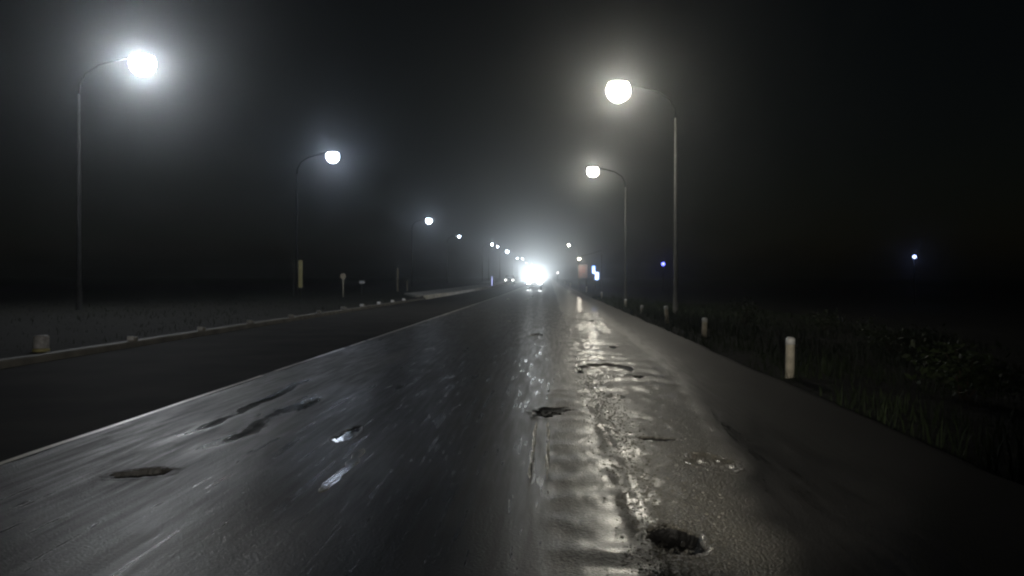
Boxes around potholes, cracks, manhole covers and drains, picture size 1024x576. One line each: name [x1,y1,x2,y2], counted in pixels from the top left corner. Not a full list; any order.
pothole [573,362,637,380]
pothole [526,406,580,419]
pothole [634,520,715,559]
pothole [98,465,187,480]
pothole [327,425,364,444]
pothole [680,451,746,474]
pothole [293,398,325,412]
